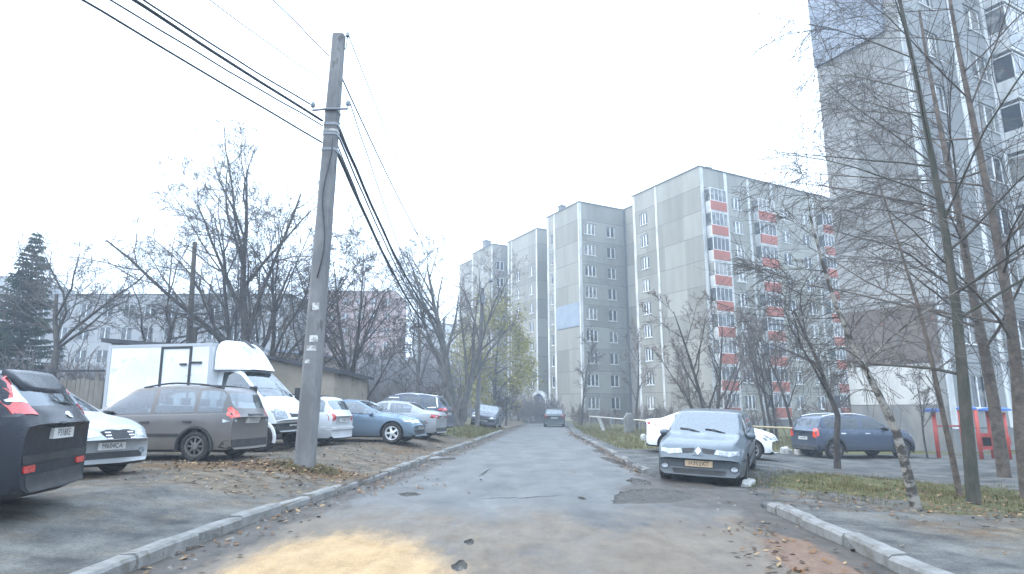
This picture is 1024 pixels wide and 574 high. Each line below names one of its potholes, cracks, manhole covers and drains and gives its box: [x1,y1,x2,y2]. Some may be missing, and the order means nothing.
pothole [451,560,467,571]
pothole [626,478,651,486]
